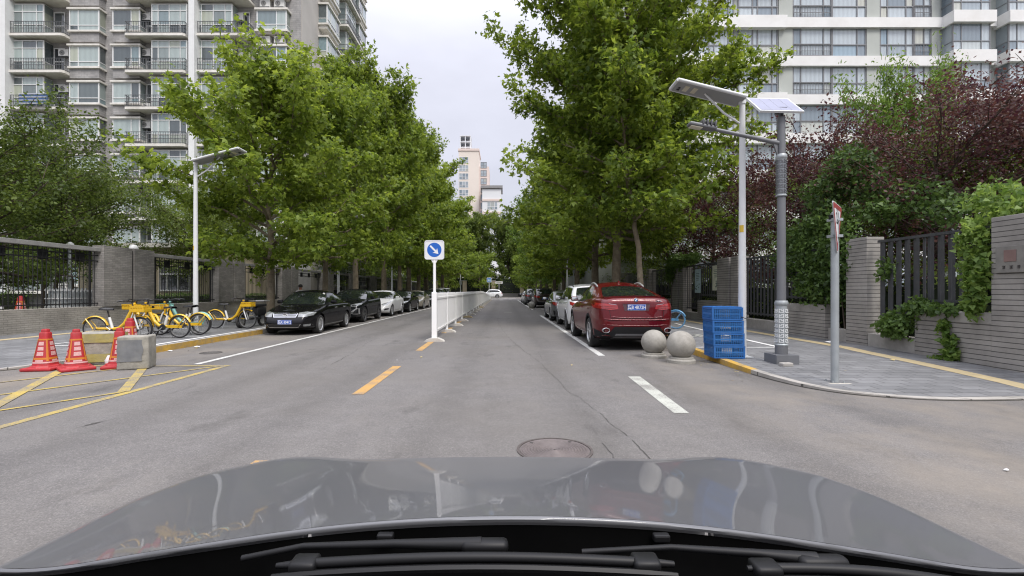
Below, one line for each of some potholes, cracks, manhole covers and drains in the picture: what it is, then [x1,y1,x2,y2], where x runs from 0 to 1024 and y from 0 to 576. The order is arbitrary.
crack [498,322,651,459]
manhole cover [517,438,593,458]
